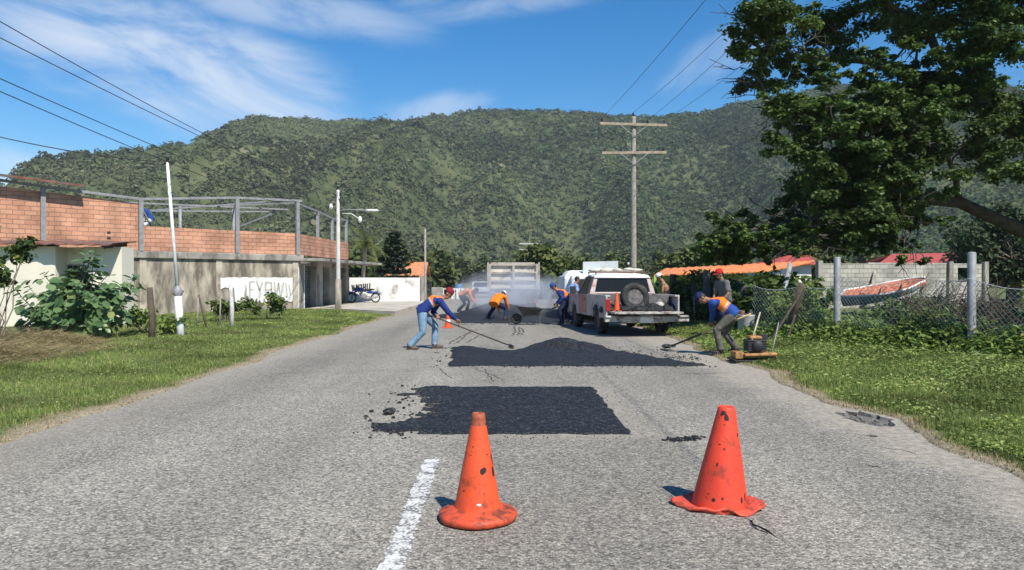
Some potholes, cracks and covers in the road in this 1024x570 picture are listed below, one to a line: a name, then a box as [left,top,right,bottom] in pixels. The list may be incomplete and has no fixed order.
crack [743,517,777,538]
crack [449,329,484,345]
pothole [835,411,895,427]
